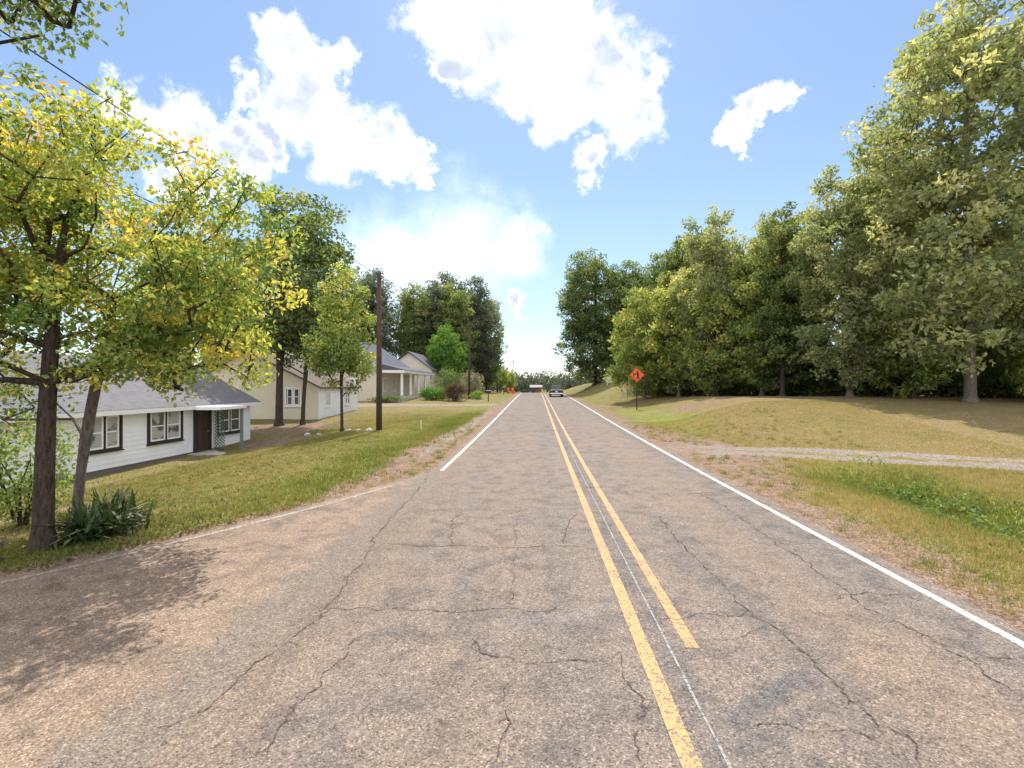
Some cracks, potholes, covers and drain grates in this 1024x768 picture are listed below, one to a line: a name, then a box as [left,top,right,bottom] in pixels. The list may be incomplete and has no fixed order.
crack [698,492,1024,697]
crack [256,639,358,757]
crack [472,638,691,766]
crack [318,514,584,620]
crack [650,516,919,762]
